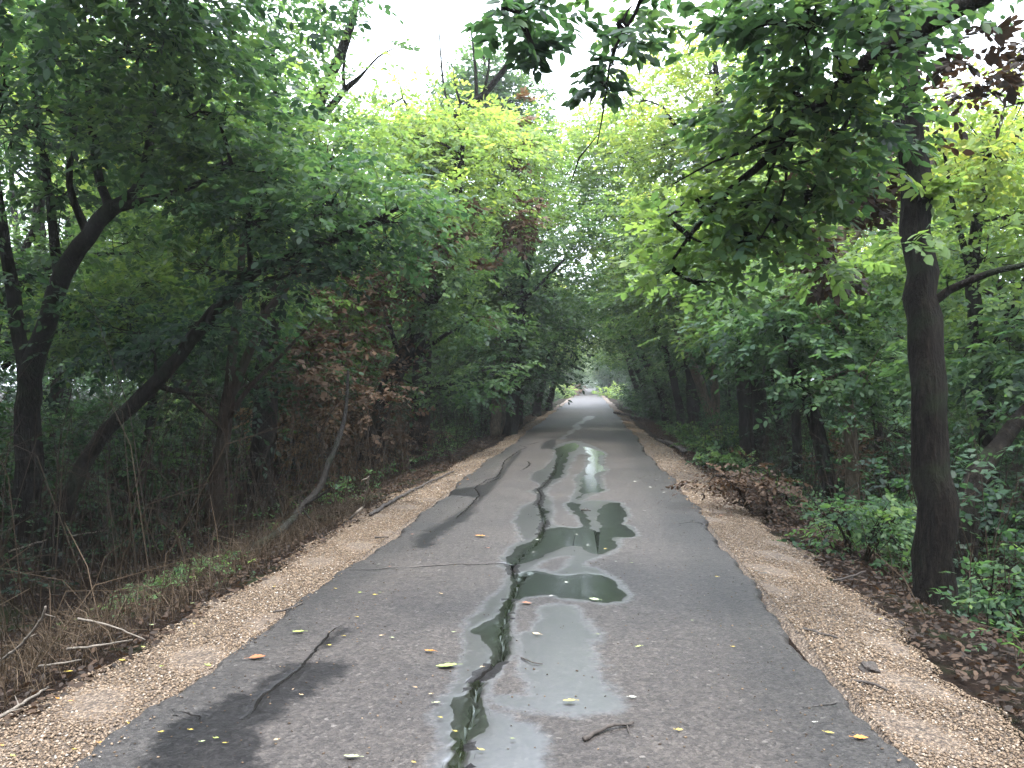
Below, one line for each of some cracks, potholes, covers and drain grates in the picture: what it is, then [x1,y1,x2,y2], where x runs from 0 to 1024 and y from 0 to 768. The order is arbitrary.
crack [348,442,555,768]
crack [238,625,345,720]
